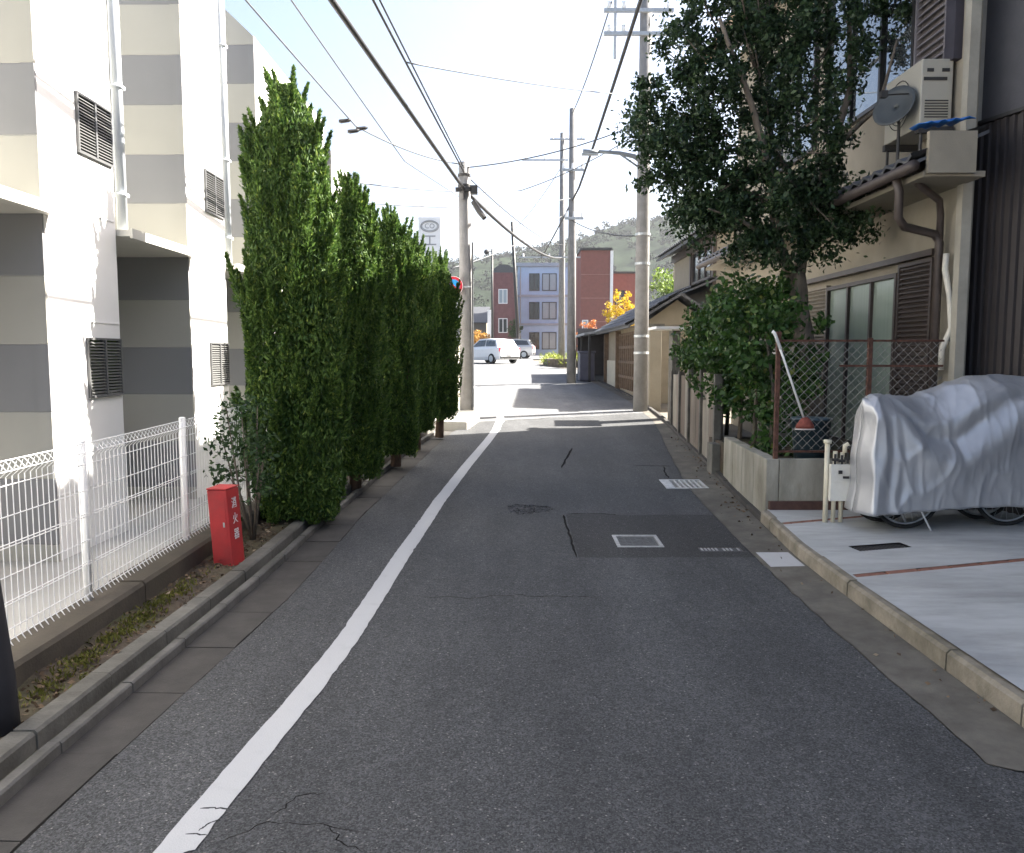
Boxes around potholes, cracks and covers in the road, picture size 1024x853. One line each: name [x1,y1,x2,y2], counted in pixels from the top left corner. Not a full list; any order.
manhole cover [612,535,664,547]
pothole [508,504,553,515]
drain grate [659,479,709,494]
crack [222,792,362,851]
